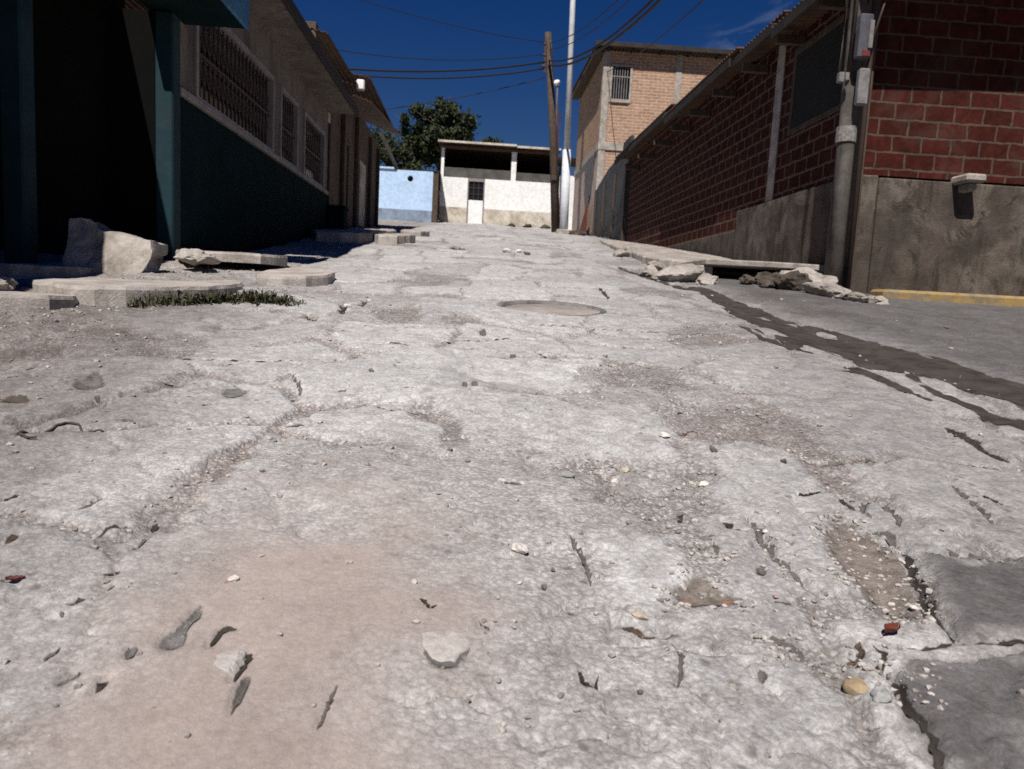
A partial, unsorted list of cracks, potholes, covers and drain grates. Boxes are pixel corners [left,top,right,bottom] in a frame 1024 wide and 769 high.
crack [713,518,815,605]
crack [182,358,302,396]
crack [945,428,1009,470]
crack [951,485,1013,524]
pothole [673,577,739,606]
crack [578,672,599,690]
crack [802,458,885,467]
crack [570,535,592,586]
pothole [825,518,919,621]
manhole cover [497,300,606,316]
